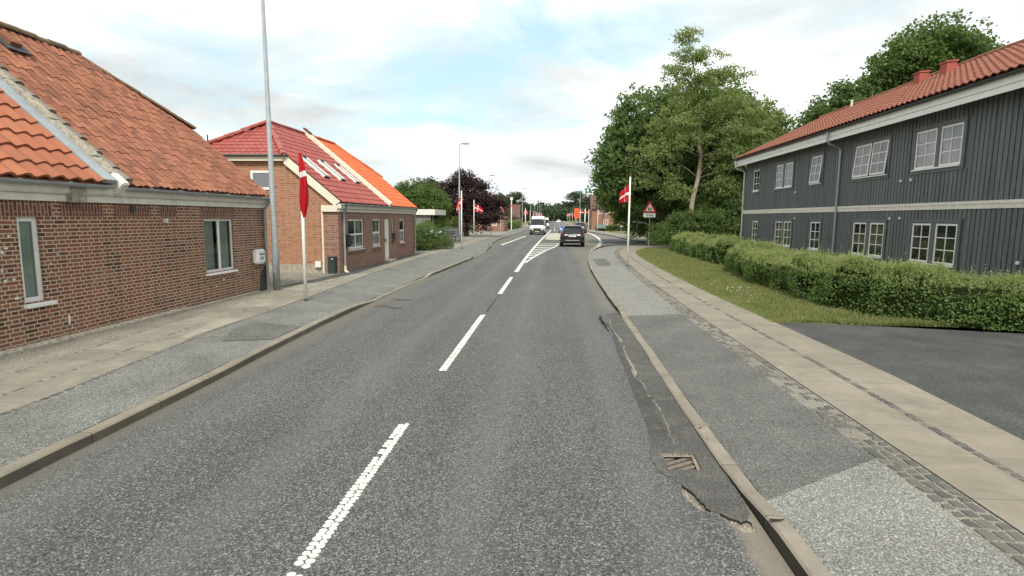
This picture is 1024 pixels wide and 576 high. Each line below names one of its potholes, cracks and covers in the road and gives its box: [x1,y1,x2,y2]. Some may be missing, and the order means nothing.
drain grate [660,453,702,470]
crack [599,316,675,444]
pothole [719,513,758,535]
pothole [681,485,710,512]
